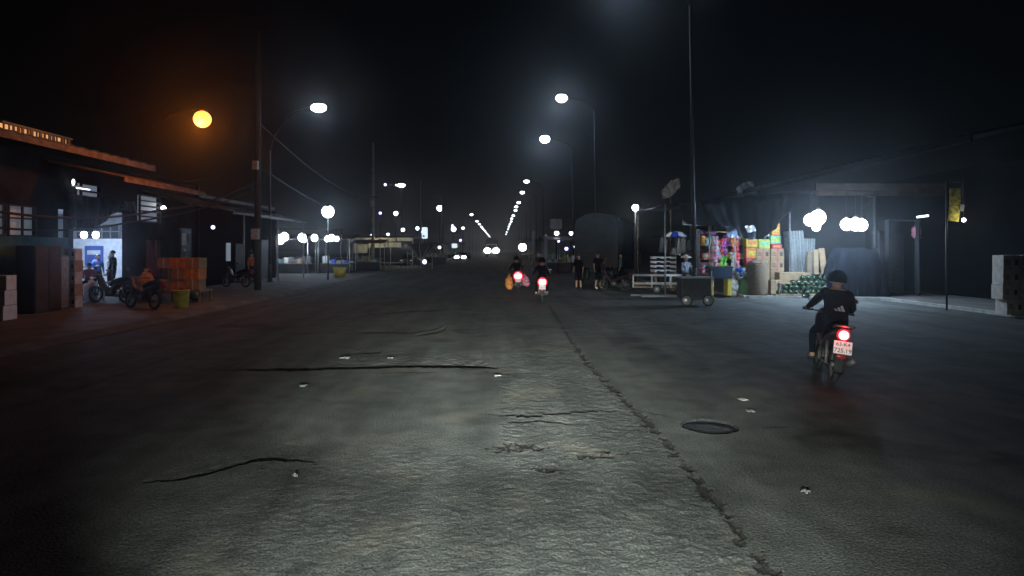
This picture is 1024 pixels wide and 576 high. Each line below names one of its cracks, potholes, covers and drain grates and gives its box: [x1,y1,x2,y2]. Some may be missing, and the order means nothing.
crack [484,305,783,576]
crack [352,305,455,354]
manhole cover [681,419,739,434]
